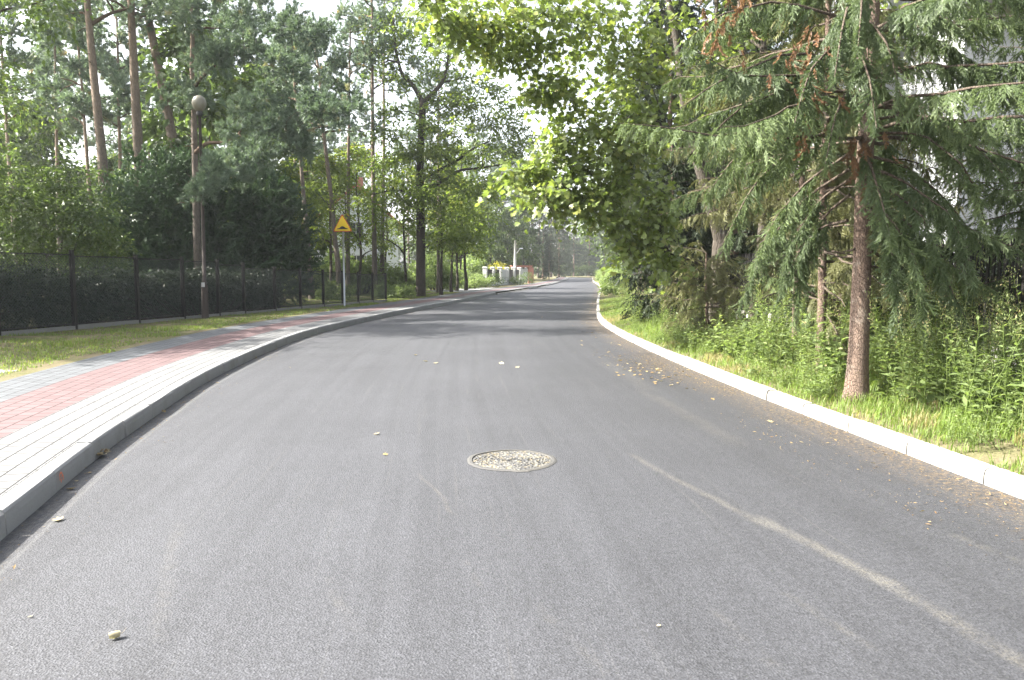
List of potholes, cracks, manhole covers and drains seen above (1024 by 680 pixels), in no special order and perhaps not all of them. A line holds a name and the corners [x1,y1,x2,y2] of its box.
manhole cover [467,449,557,472]
